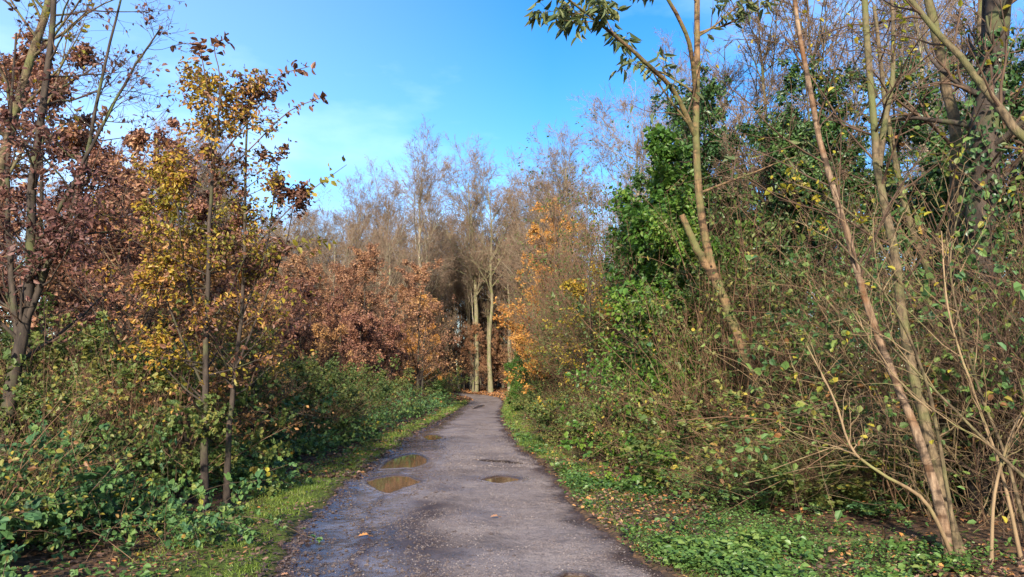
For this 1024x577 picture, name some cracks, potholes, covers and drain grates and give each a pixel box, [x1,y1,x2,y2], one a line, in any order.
pothole [378,452,432,470]
pothole [360,473,427,494]
pothole [477,475,525,484]
pothole [421,433,445,441]
